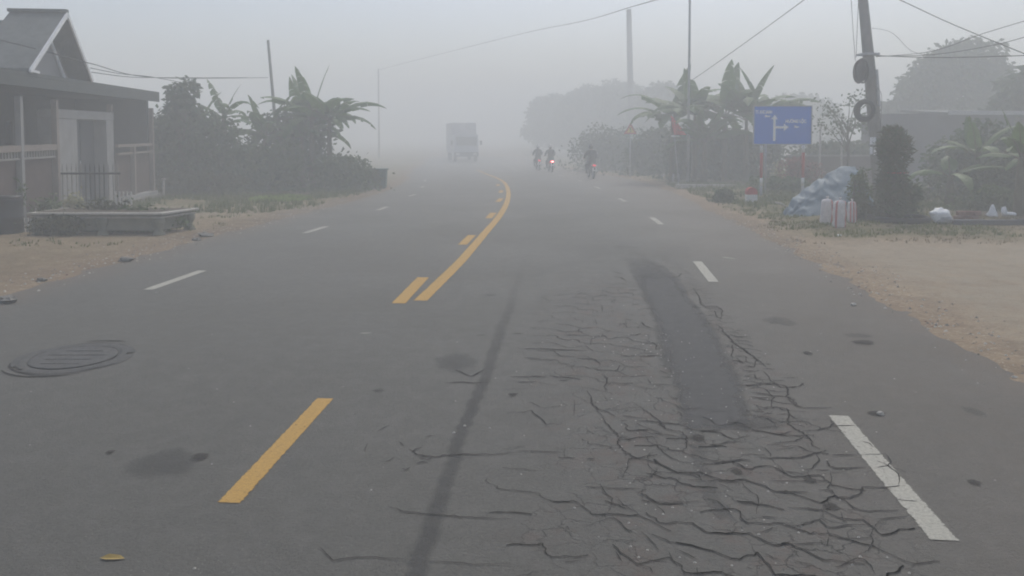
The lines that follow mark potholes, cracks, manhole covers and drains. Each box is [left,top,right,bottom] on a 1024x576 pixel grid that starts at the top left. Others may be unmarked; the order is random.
crack [320,547,402,560]
crack [365,253,940,576]
manhole cover [8,343,136,375]
